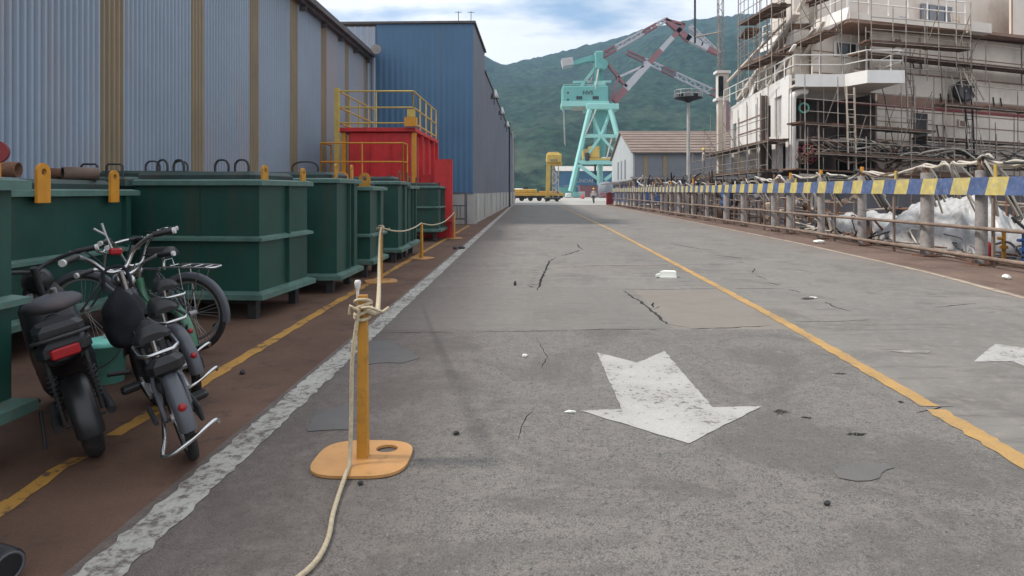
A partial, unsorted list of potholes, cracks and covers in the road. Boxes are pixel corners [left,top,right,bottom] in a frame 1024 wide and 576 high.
crack [528,243,848,327]
